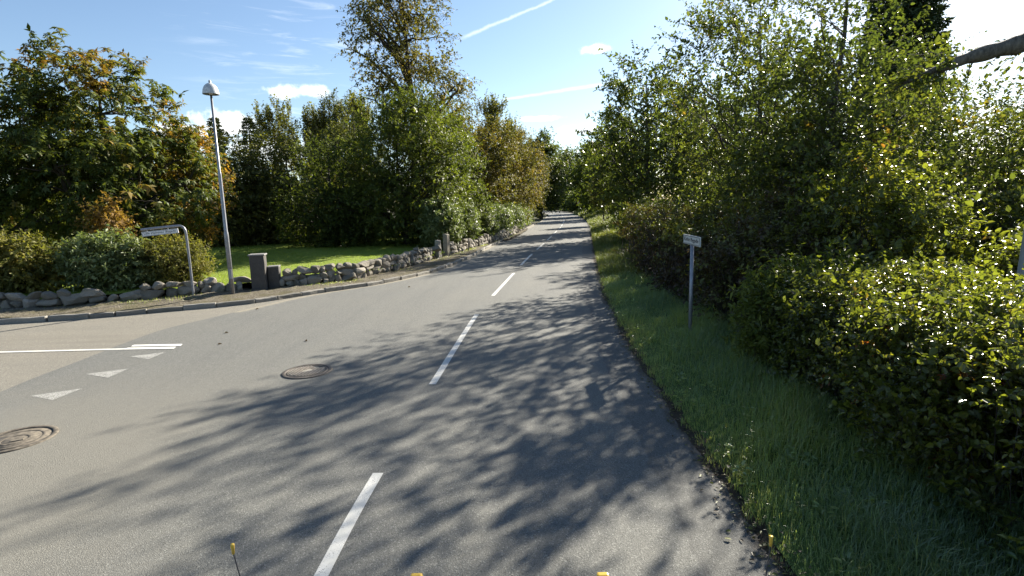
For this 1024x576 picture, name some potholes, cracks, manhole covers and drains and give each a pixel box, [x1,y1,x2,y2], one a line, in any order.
manhole cover [0,425,59,454]
manhole cover [281,364,332,379]
